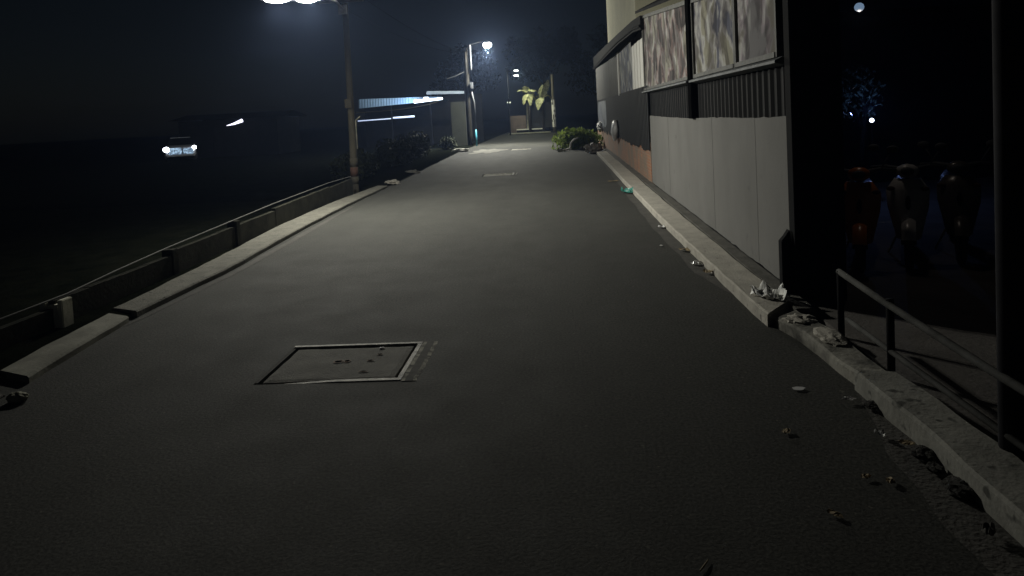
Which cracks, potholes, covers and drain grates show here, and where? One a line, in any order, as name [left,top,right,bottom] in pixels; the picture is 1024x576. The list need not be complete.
manhole cover [255,341,438,385]
